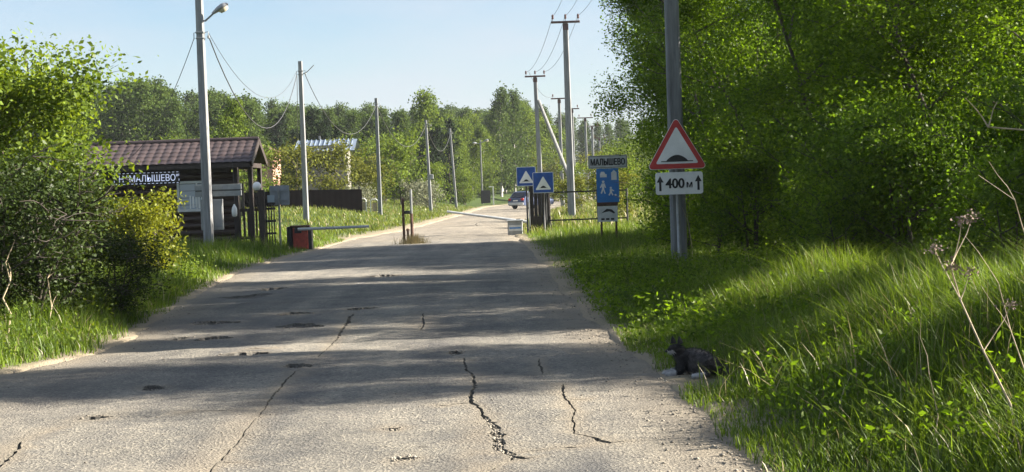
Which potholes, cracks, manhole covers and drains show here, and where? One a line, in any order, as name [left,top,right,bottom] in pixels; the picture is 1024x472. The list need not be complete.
crack [440,358,622,472]
crack [0,428,61,467]
